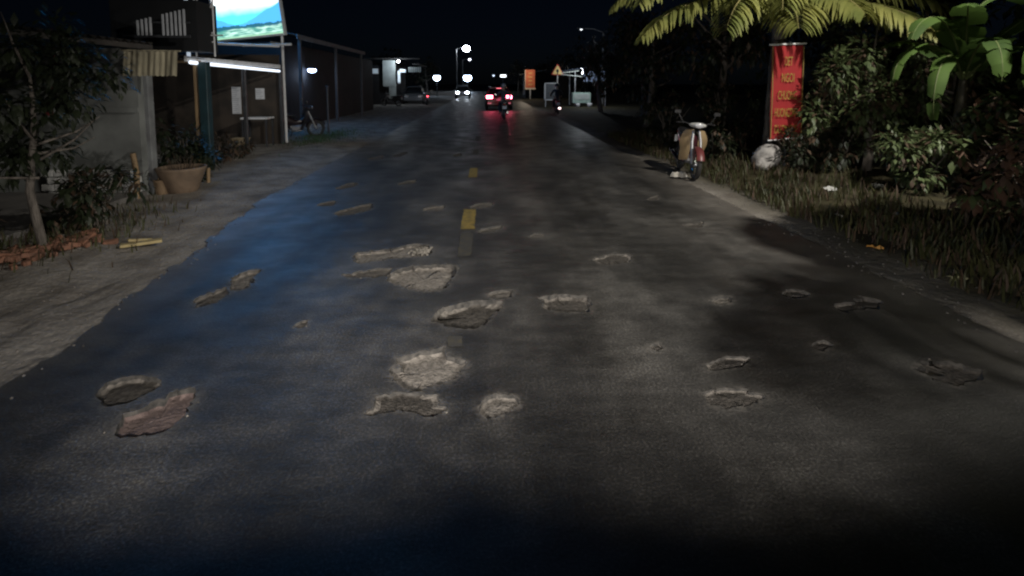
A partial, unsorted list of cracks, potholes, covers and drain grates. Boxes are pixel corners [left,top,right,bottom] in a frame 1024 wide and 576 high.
pothole [334,203,375,216]
pothole [386,264,457,292]
pothole [486,289,513,299]
pothole [364,392,447,417]
pothole [537,294,593,312]
pothole [230,269,262,291]
pothole [115,387,197,439]
pothole [479,393,520,419]
pothole [701,388,765,409]
pothole [782,289,810,298]
pothole [706,356,750,371]
pothole [352,244,432,264]
